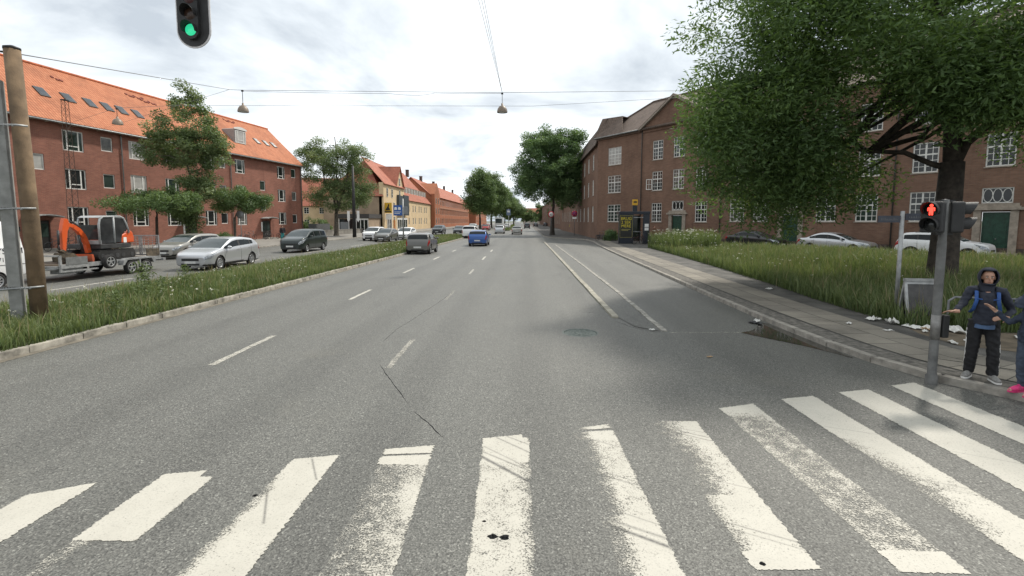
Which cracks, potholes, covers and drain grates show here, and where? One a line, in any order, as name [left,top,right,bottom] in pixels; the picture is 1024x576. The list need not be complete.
crack [380,365,440,435]
manhole cover [562,328,598,337]
